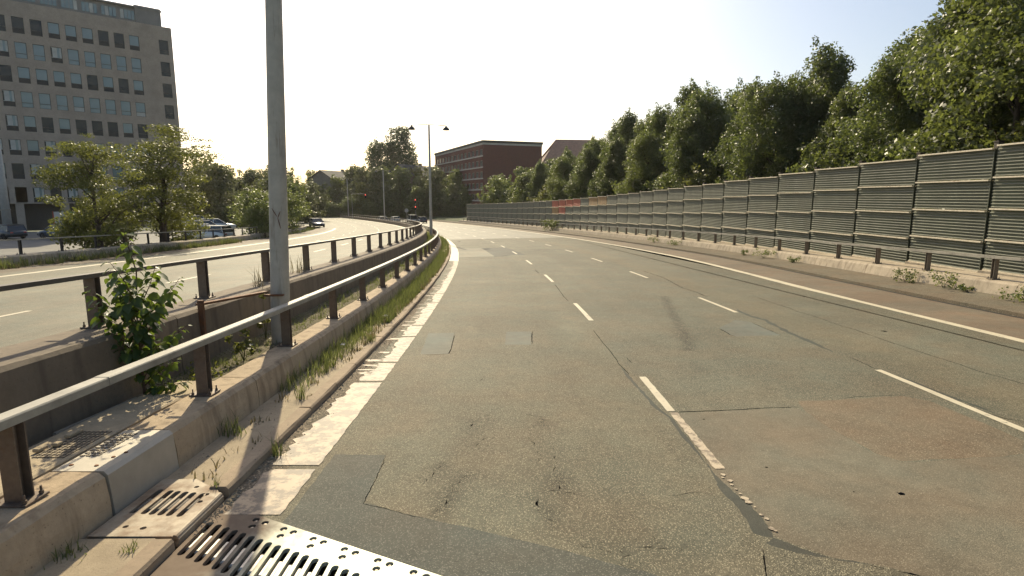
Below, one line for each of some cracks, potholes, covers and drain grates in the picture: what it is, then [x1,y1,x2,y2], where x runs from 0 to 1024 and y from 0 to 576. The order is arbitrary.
crack [621,367,920,576]
crack [419,379,490,512]
